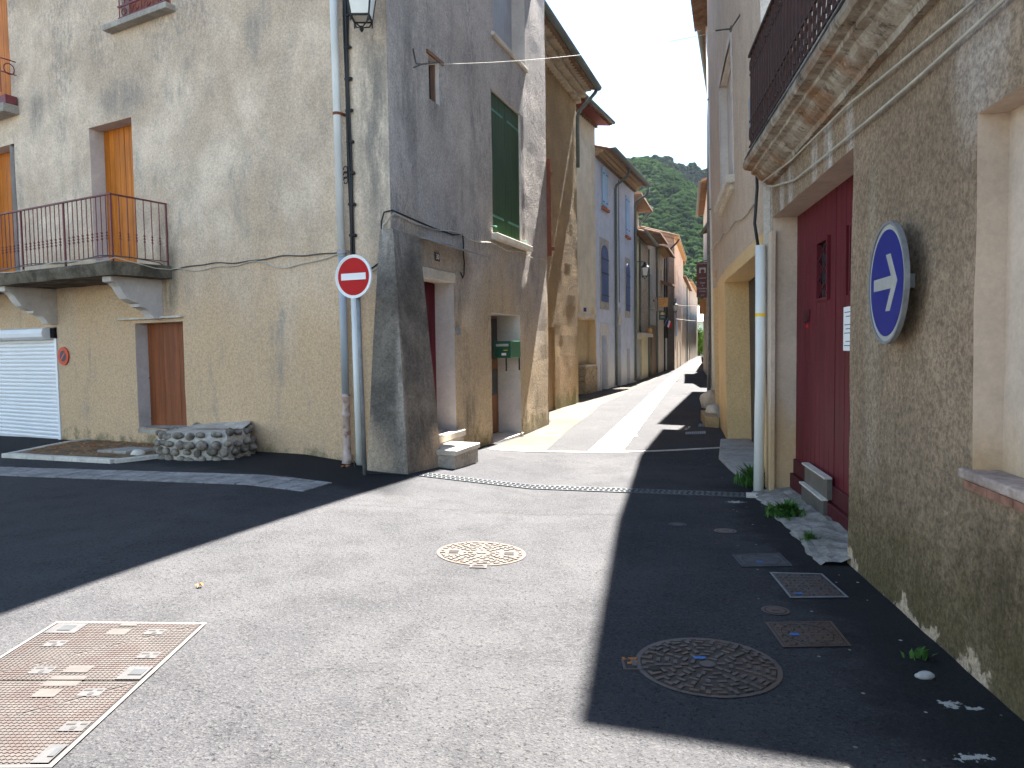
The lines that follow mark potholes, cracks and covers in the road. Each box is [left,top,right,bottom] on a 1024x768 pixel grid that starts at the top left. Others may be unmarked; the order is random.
utility cover [761,606,790,615]
drain grate [419,473,758,498]
manhole cover [621,638,783,698]
utility cover [732,553,793,567]
utility cover [770,572,849,598]
manhole cover [437,541,526,569]
utility cover [765,621,852,648]
utility cover [0,621,206,768]
